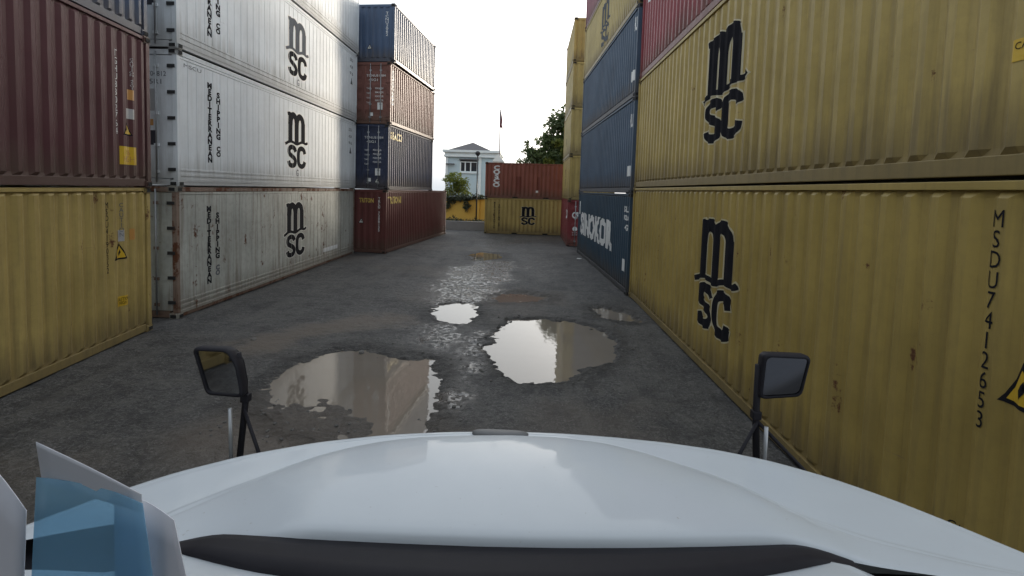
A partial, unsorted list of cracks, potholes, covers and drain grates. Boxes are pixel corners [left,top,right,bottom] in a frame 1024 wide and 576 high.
pothole [464,251,507,261]
pothole [585,304,649,324]
pothole [424,300,488,325]
pothole [479,316,628,388]
pothole [248,342,453,443]
pothole [479,289,557,303]
